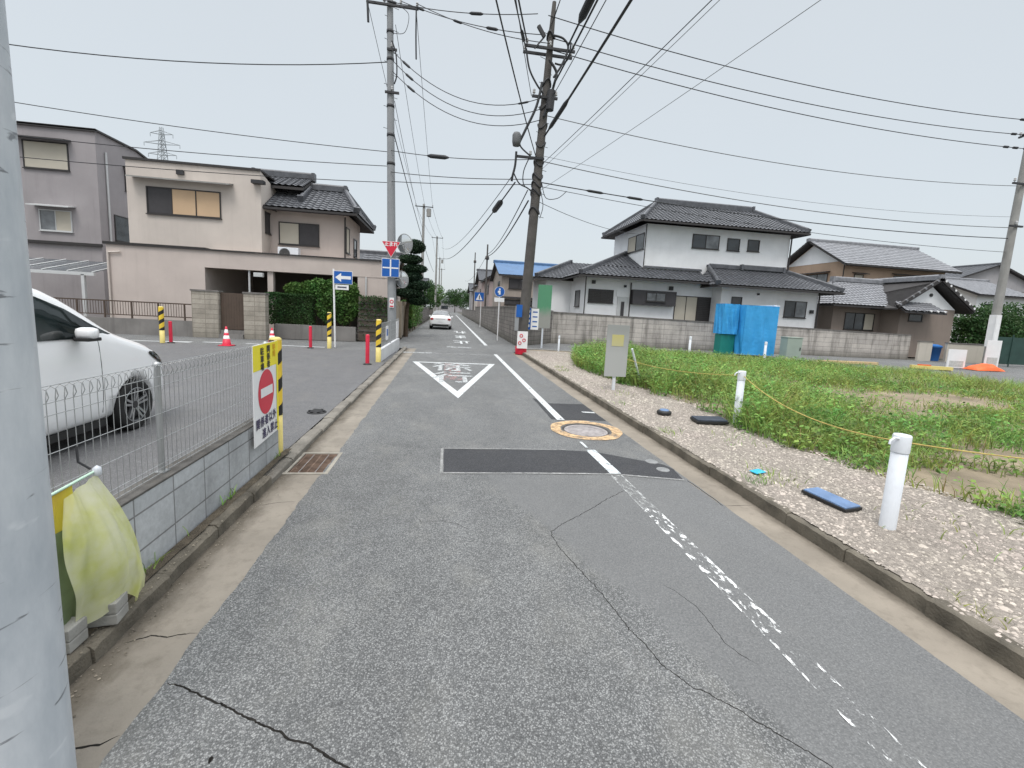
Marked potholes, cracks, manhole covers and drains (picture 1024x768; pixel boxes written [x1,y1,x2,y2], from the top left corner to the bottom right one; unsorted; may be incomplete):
crack [75,735,120,750]
crack [165,683,350,768]
manhole cover [562,424,611,437]
crack [127,633,190,643]
drain grate [282,452,343,475]
crack [551,490,833,768]
